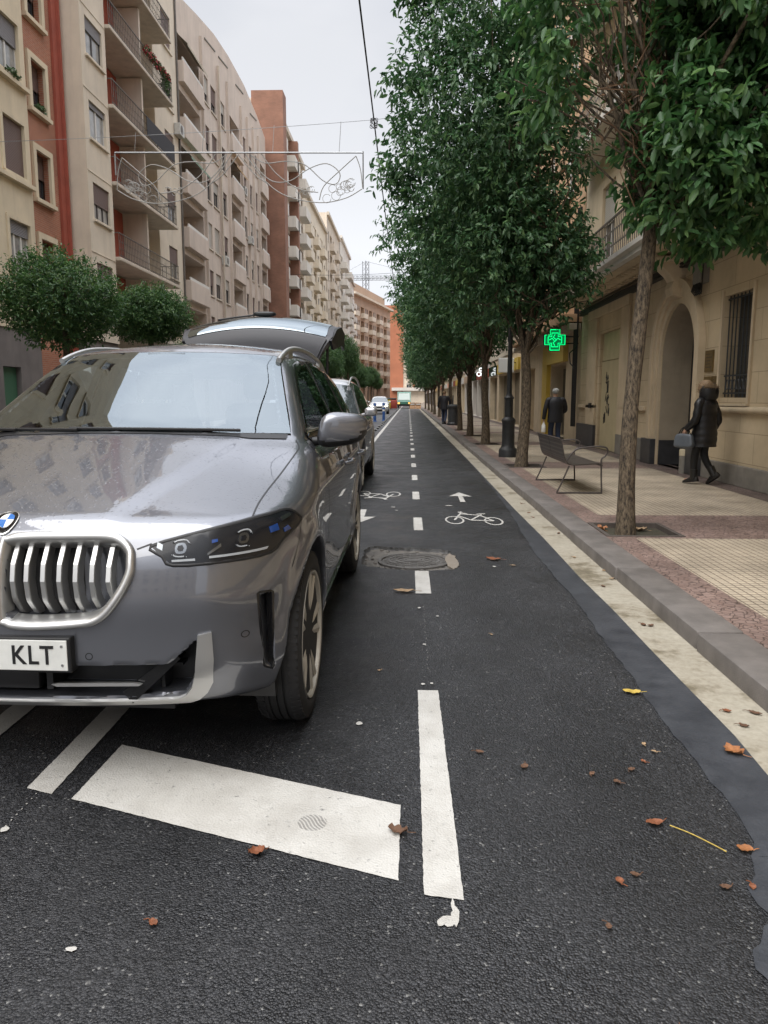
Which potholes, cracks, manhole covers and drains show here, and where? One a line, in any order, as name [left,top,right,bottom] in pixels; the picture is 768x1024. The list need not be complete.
manhole cover [378,553,447,571]
